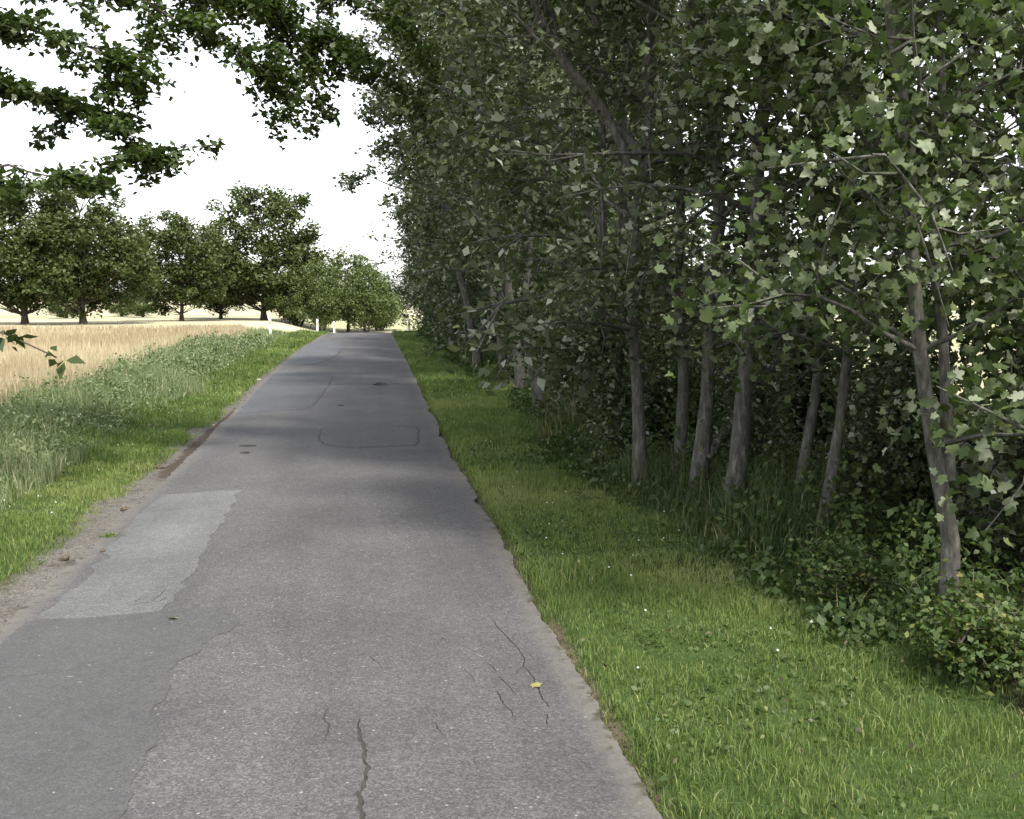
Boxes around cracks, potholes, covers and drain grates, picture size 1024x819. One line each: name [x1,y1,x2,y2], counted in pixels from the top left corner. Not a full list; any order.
crack [355,719,371,819]
crack [369,617,553,733]
